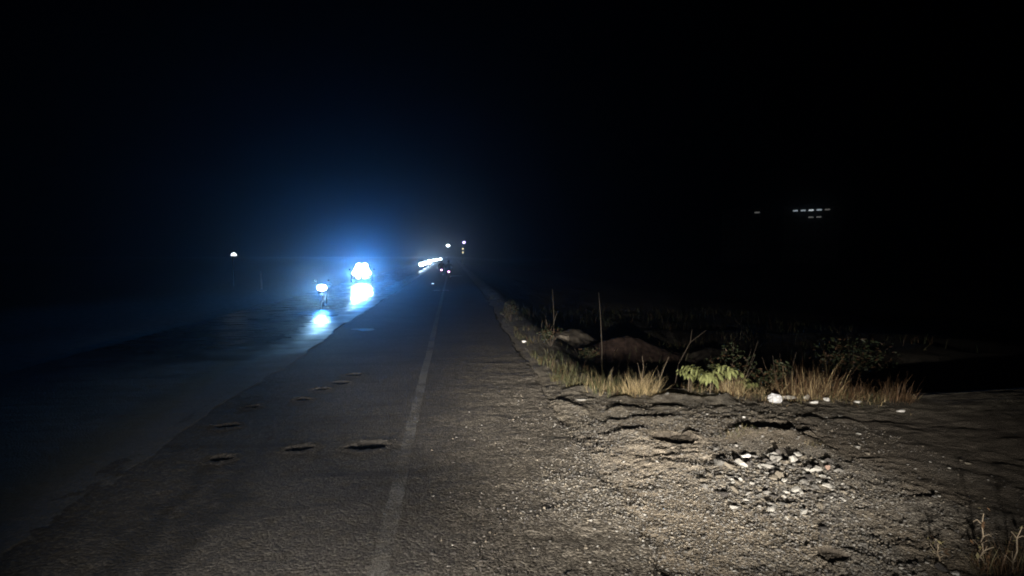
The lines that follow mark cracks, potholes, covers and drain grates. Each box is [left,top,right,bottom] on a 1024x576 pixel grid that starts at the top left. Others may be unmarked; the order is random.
pothole [199,451,243,465]
pothole [333,438,401,453]
pothole [207,420,249,430]
pothole [644,428,709,449]
pothole [275,441,325,454]
